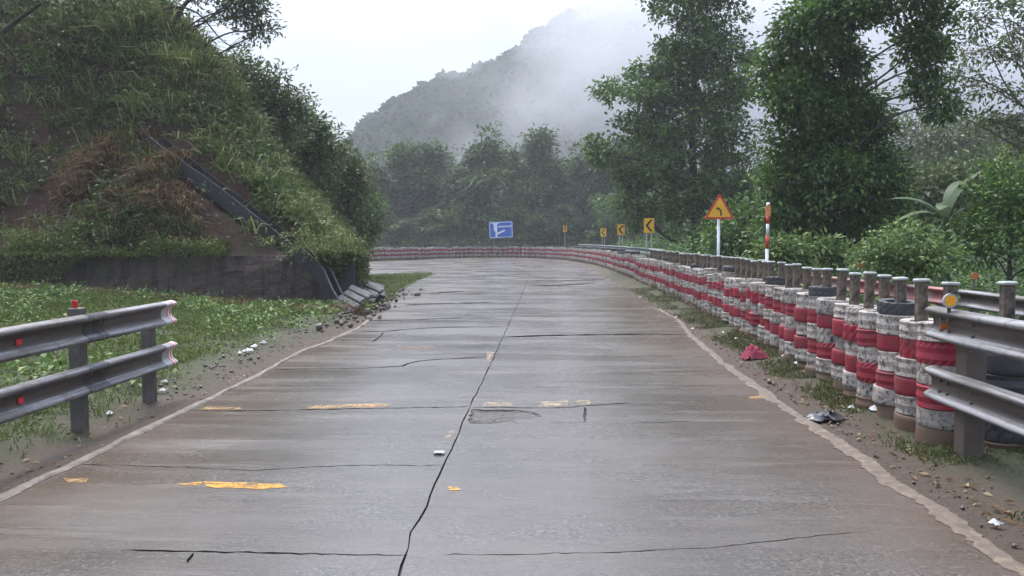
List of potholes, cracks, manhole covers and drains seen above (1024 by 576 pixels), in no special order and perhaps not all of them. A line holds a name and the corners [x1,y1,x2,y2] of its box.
crack [83,275,851,576]
